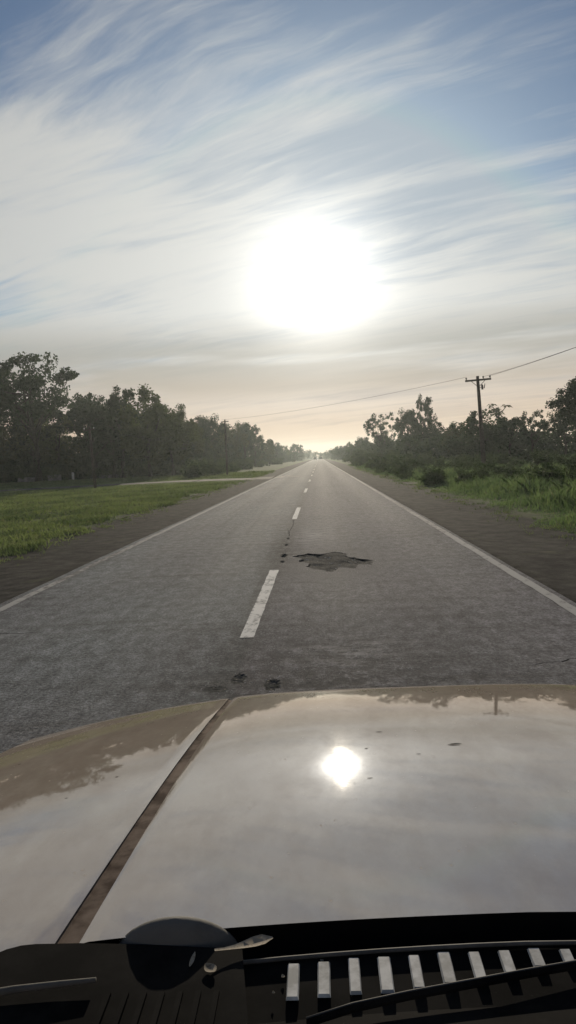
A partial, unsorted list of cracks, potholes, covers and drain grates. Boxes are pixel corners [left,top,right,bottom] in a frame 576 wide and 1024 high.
pothole [230,673,247,685]
pothole [293,552,373,572]
pothole [263,678,282,691]
